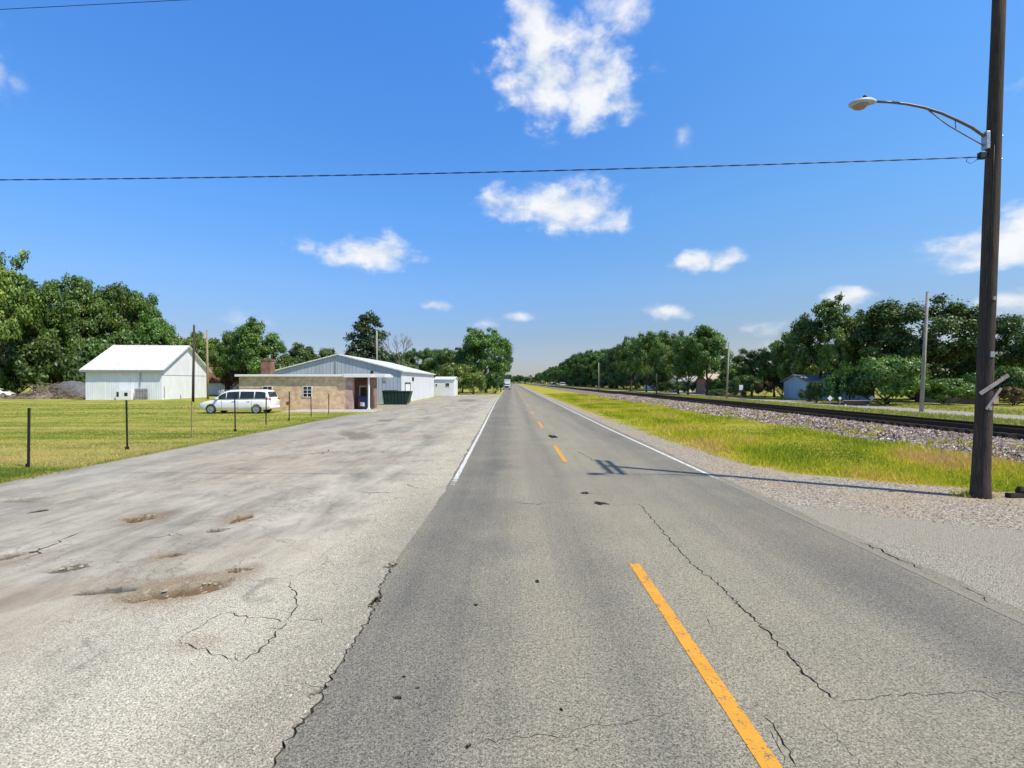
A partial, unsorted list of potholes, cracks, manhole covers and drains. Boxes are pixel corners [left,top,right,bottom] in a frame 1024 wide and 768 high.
crack [742,707,797,767]
crack [463,713,669,745]
crack [614,504,1019,707]
crack [181,583,327,663]
pothole [226,513,254,524]
crack [26,532,81,559]
pothole [116,514,166,523]
pothole [106,576,235,604]
pothole [37,561,93,574]
